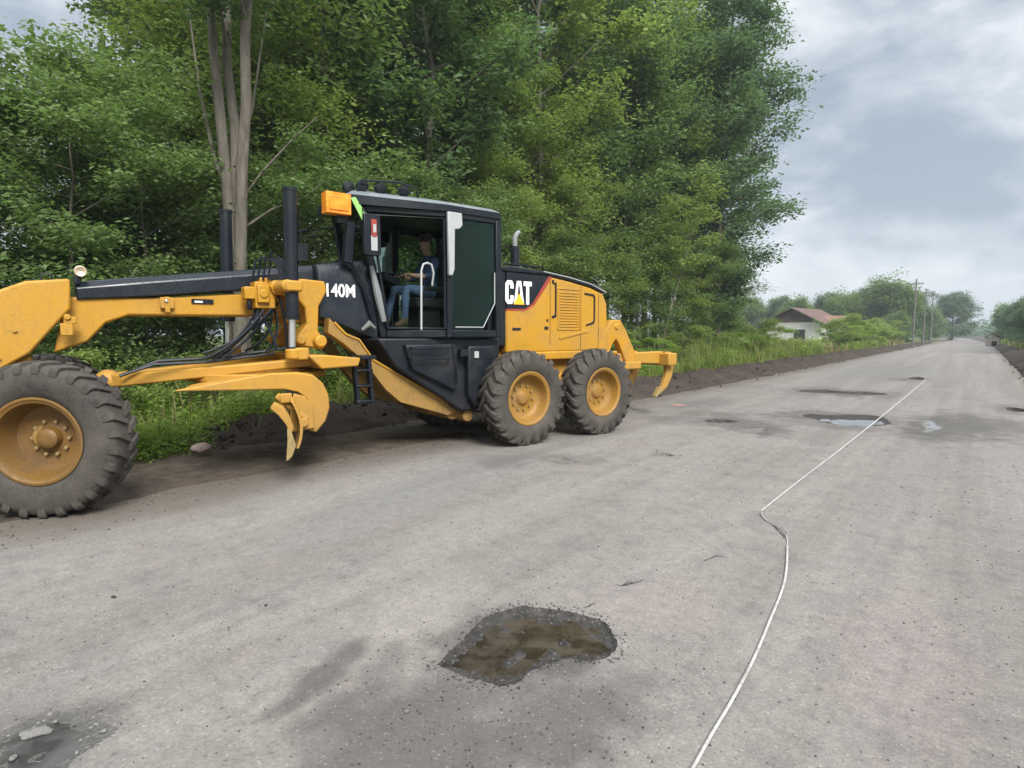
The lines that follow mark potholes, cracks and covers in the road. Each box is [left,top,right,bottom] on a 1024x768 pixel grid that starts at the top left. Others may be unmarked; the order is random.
pothole [919,419,944,433]
pothole [437,605,617,687]
pothole [803,414,891,427]
pothole [0,711,119,768]
